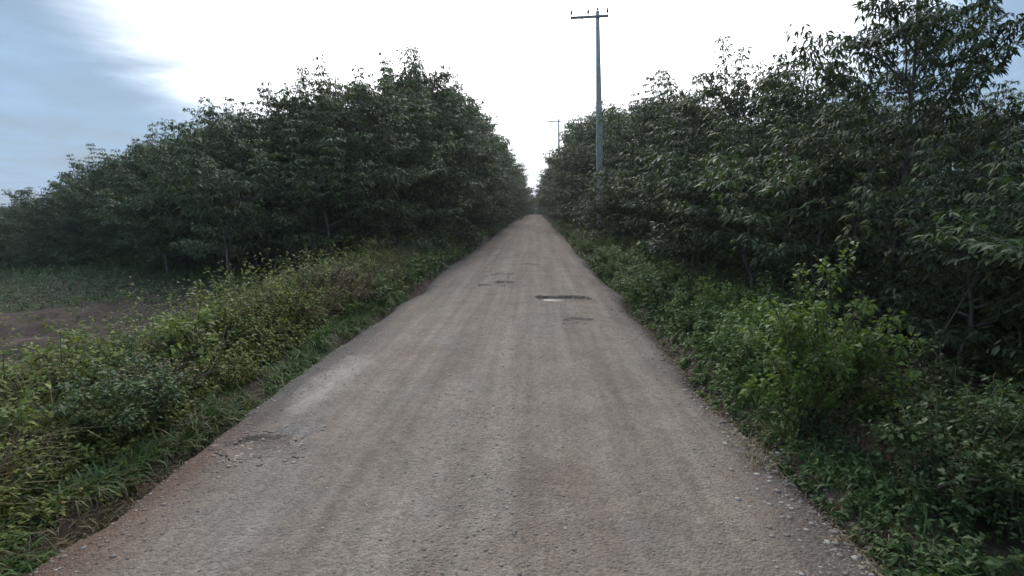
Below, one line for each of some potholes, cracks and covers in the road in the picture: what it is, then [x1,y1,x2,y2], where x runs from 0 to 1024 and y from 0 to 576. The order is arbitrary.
pothole [209,432,306,461]
pothole [553,316,601,325]
pothole [525,294,604,303]
